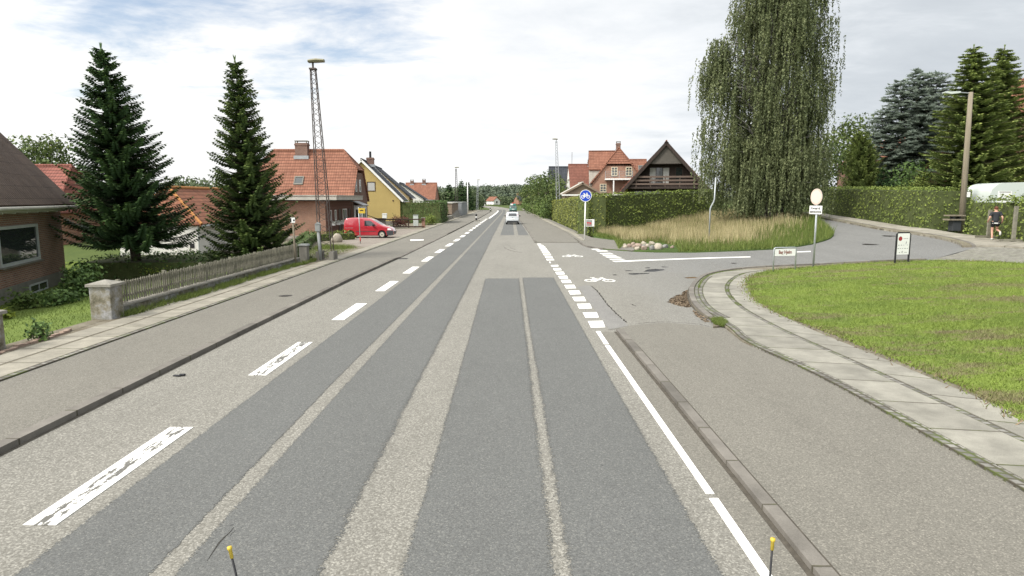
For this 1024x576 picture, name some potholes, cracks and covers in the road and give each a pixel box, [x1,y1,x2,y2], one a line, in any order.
crack [592,286,635,330]
